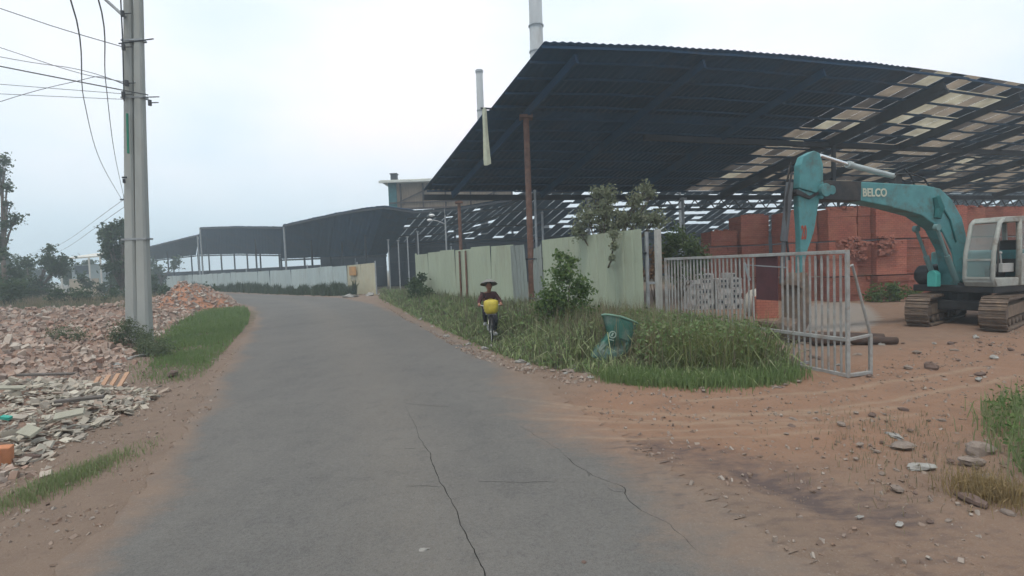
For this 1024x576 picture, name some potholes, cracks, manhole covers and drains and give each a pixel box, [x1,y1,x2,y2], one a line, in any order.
crack [409,421,486,576]
crack [520,426,690,544]
